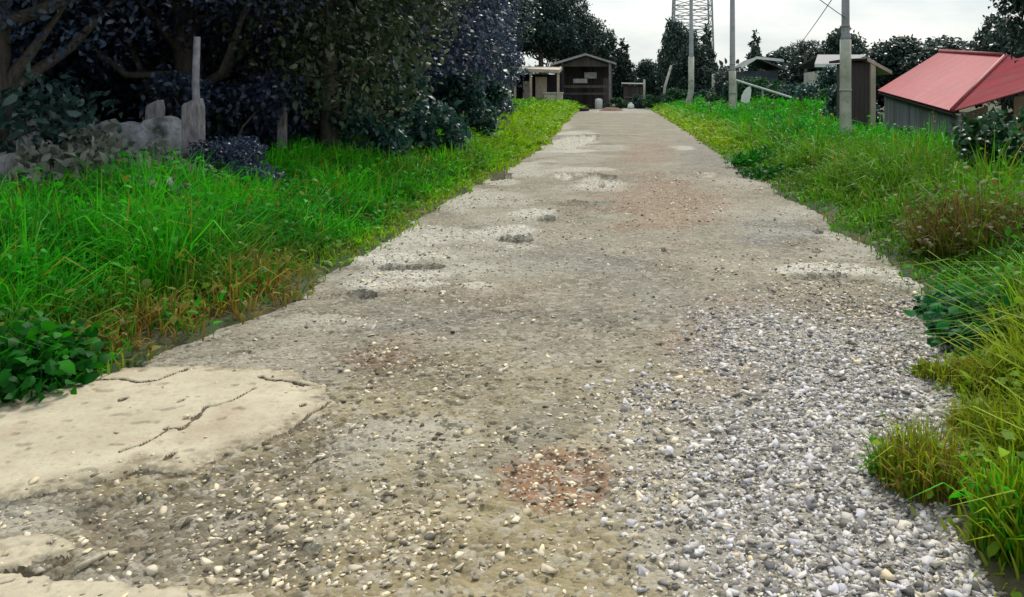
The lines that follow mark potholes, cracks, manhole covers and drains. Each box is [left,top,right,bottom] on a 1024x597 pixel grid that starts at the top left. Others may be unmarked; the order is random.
crack [96,369,331,461]
pothole [553,172,575,180]
pothole [550,134,599,149]
pothole [580,172,618,189]
pothole [344,289,378,300]
pothole [378,262,446,271]
pothole [495,234,533,244]
pothole [536,215,556,223]
